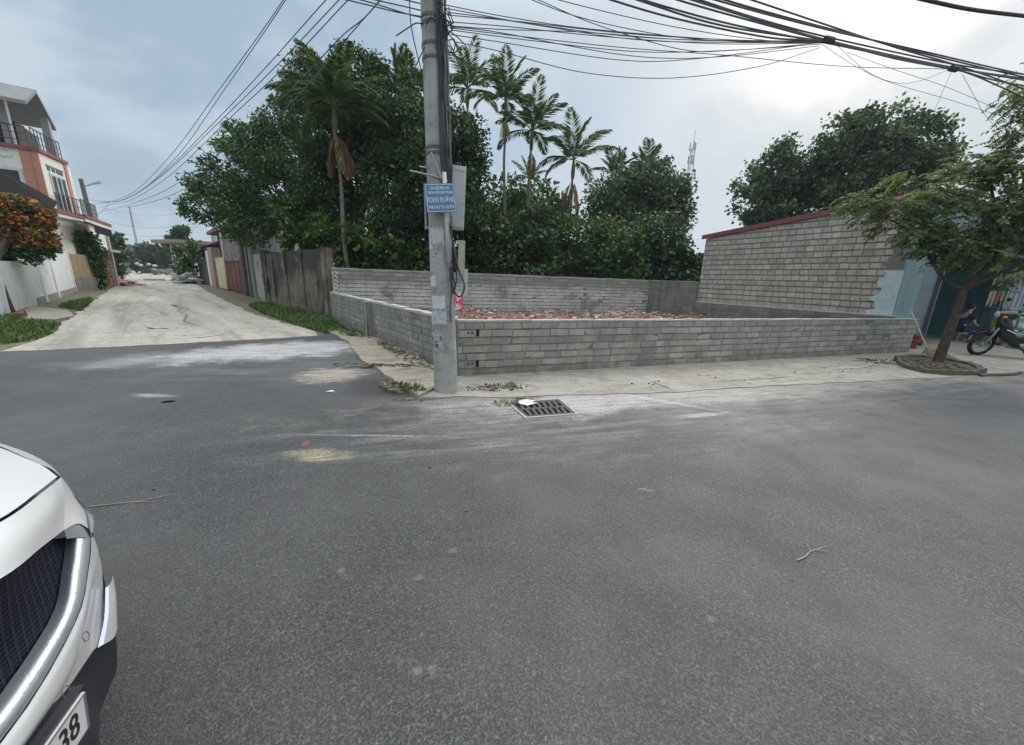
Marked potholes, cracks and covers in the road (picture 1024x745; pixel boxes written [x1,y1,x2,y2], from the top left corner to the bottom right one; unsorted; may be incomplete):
drain grate [508,398,578,419]
crack [145,305,230,338]
